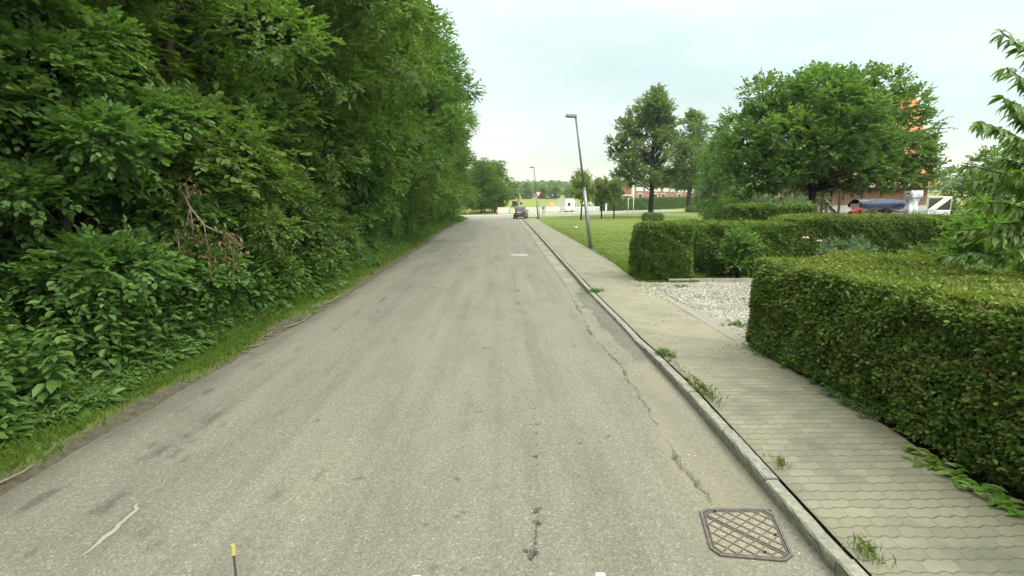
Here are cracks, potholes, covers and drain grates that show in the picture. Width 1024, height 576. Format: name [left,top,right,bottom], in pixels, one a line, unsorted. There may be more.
crack [510,273,730,568]
manhole cover [700,508,793,562]
